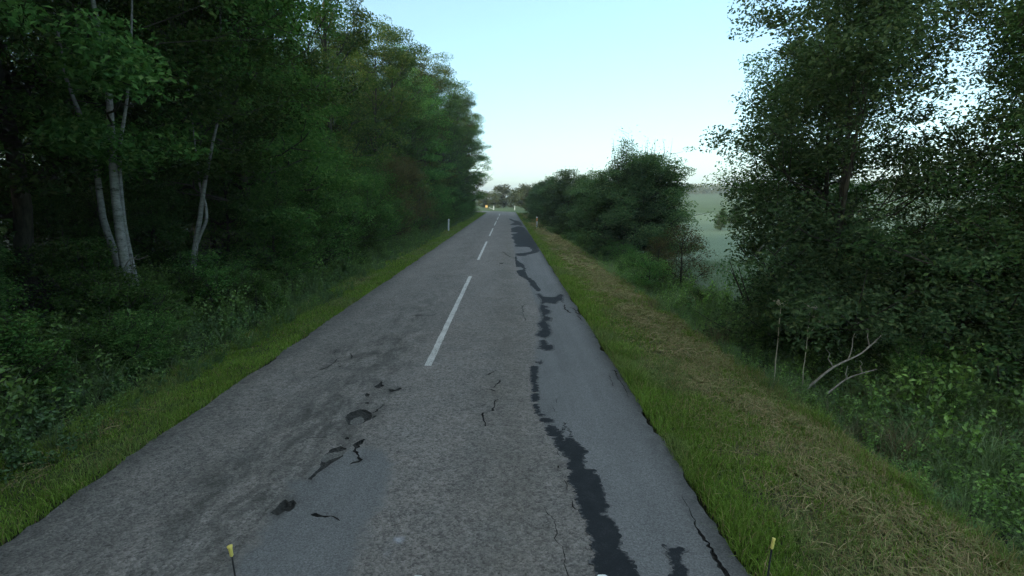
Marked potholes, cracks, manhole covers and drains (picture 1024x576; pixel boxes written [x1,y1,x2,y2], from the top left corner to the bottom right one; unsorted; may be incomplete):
pothole [270,499,296,515]
crack [544,452,576,576]
pothole [345,409,372,426]
crack [481,370,501,426]
crack [351,439,365,464]
crack [682,497,730,576]
